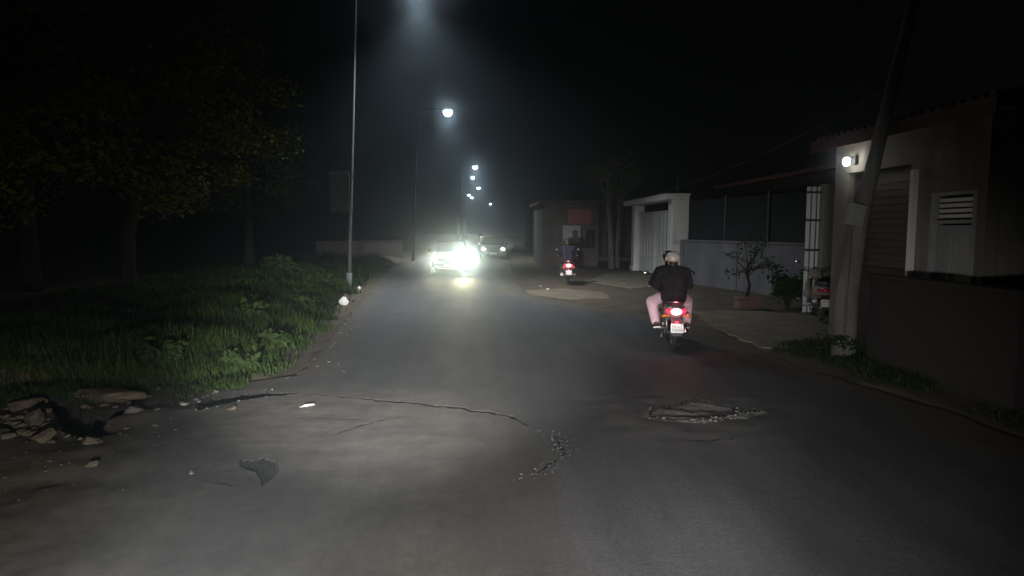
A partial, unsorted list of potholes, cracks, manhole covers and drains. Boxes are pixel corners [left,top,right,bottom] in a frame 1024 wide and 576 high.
pothole [239,456,279,486]
pothole [29,396,160,440]
crack [305,394,571,484]
pothole [644,398,767,423]
